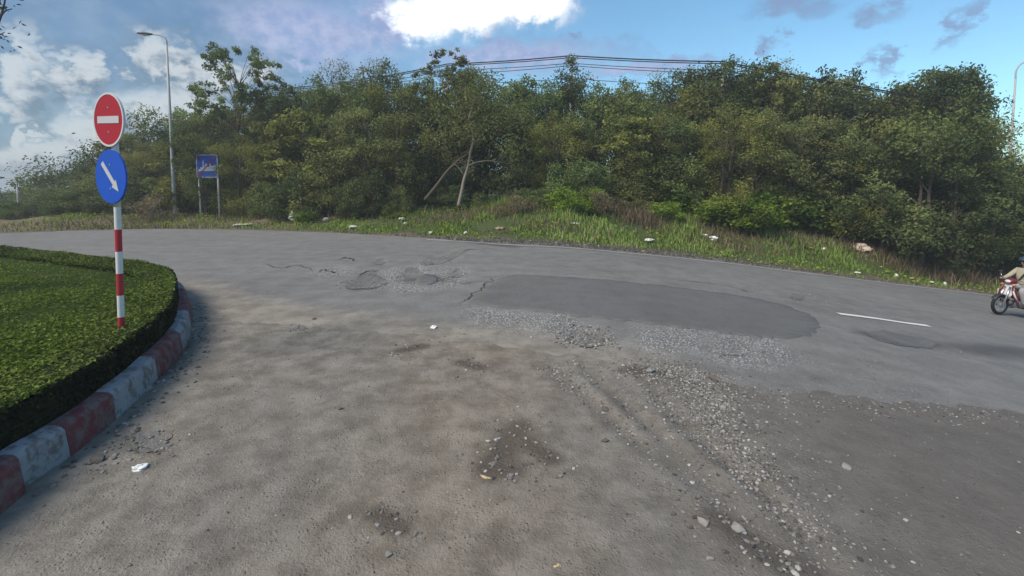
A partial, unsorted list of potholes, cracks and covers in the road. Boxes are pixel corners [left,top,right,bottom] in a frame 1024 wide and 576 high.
pothole [336,270,402,289]
crack [267,257,375,290]
